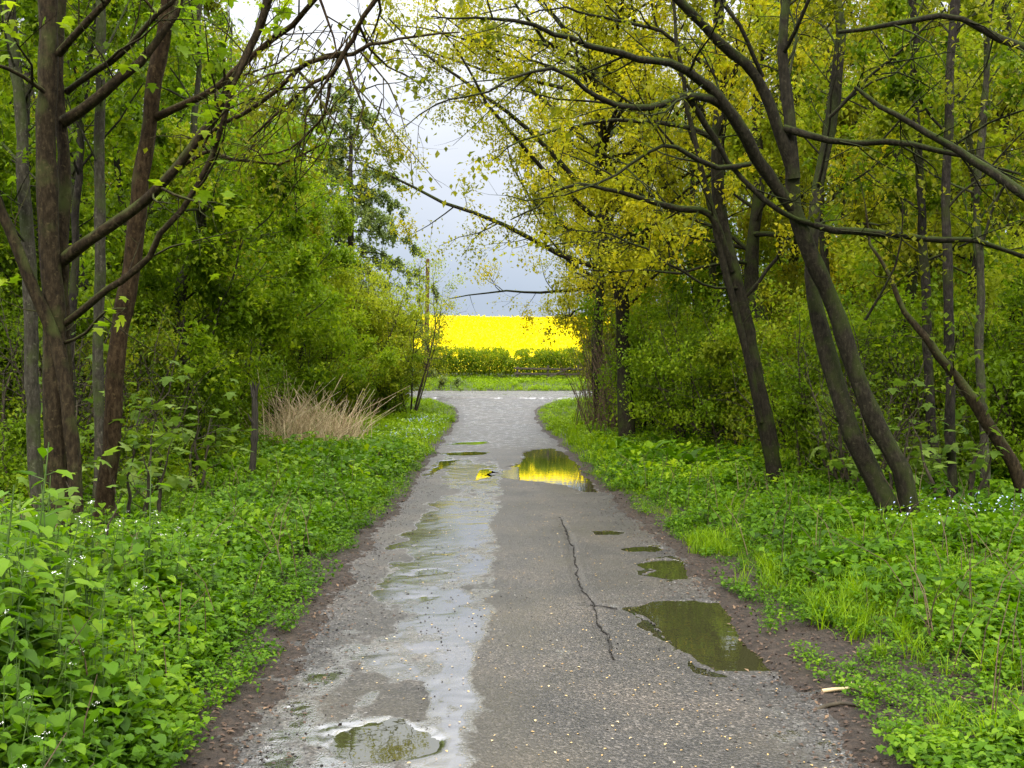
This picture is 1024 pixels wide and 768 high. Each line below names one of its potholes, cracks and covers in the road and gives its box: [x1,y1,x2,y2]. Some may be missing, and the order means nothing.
crack [559,517,617,660]
pothole [631,598,781,685]
